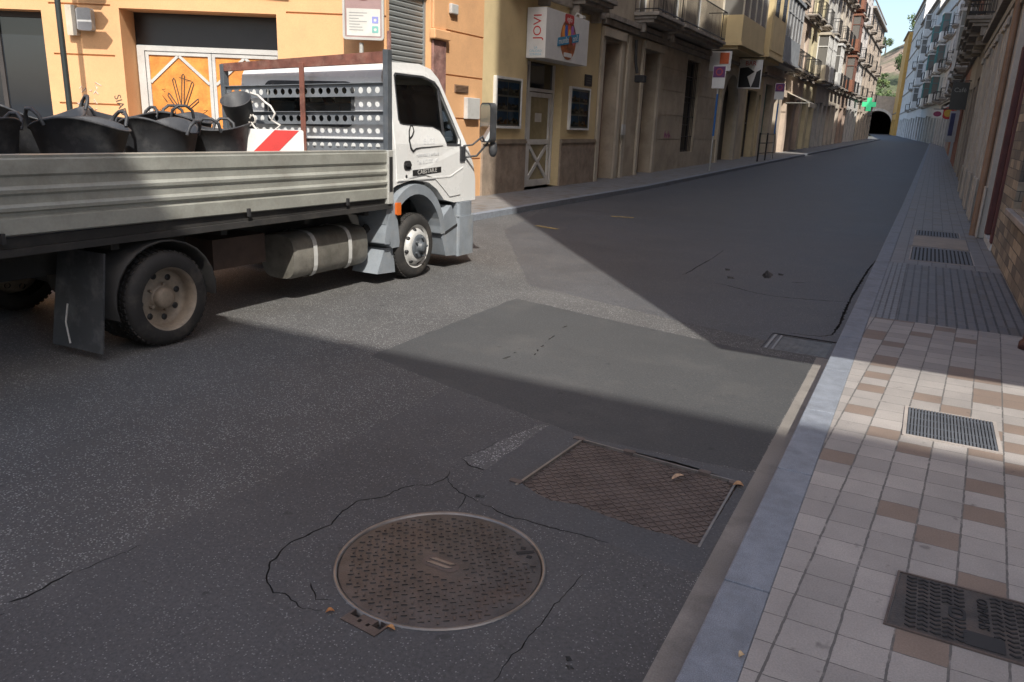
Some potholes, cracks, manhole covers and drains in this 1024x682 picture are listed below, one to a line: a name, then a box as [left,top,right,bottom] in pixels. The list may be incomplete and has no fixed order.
drain grate [915,230,961,239]
crack [1,545,140,615]
drain grate [902,406,1003,455]
manhole cover [333,511,546,637]
manhole cover [509,436,742,547]
crack [494,575,582,681]
manhole cover [883,570,1024,667]
crack [265,442,608,611]
drain grate [909,246,975,267]
drain grate [761,334,836,358]
crack [717,262,875,340]
